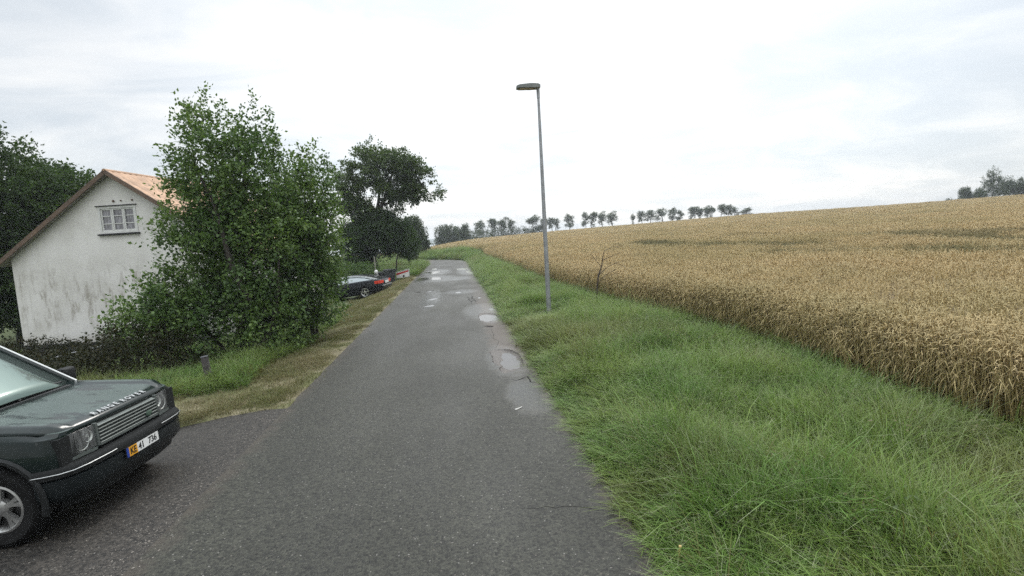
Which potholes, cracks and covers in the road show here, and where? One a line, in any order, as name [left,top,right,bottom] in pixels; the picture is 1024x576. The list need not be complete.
pothole [489,349,524,373]
pothole [478,313,499,323]
